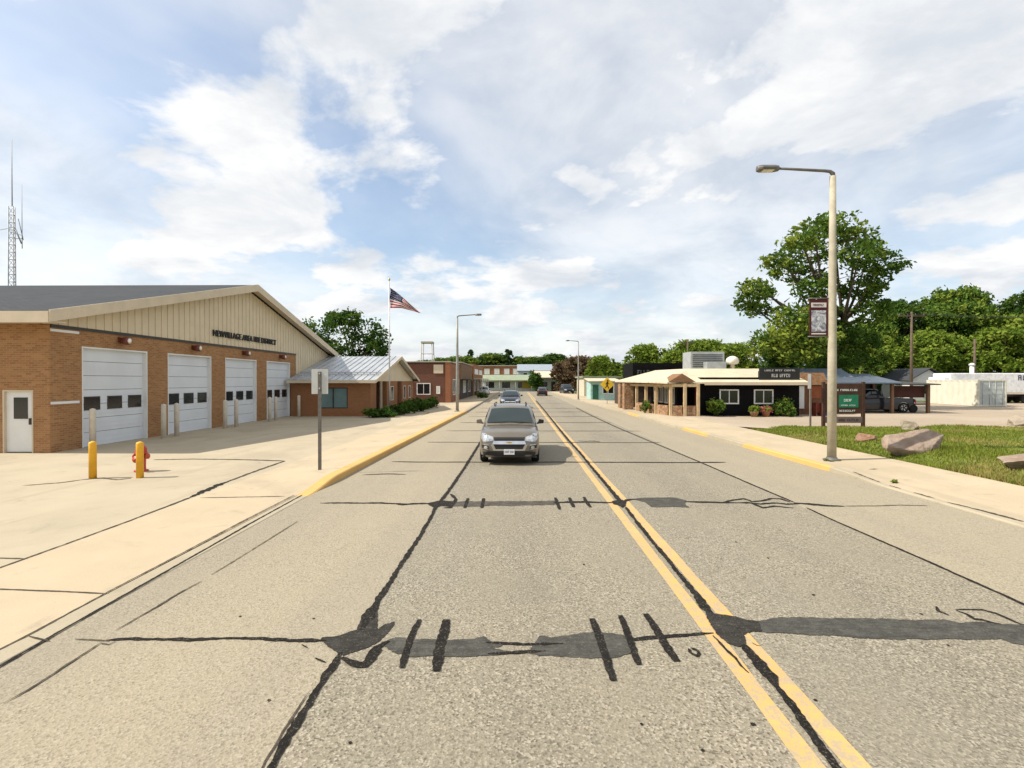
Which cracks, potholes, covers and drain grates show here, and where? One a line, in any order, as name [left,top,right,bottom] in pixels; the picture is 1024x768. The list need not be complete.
crack [712,635,760,673]
crack [724,498,839,508]
